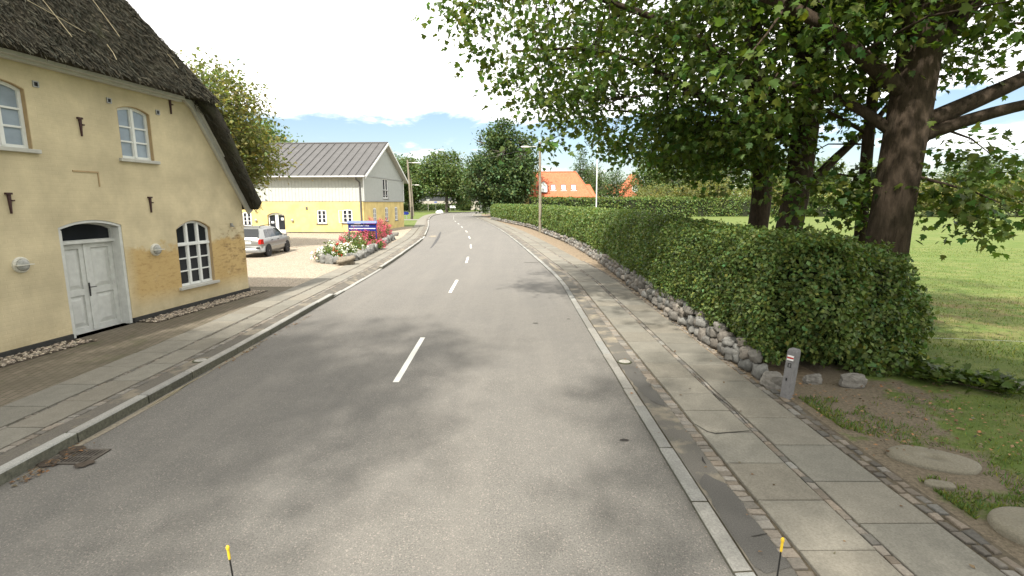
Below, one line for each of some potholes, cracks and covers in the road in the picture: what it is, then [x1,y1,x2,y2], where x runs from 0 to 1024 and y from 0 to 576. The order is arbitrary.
drain grate [36,445,111,468]
